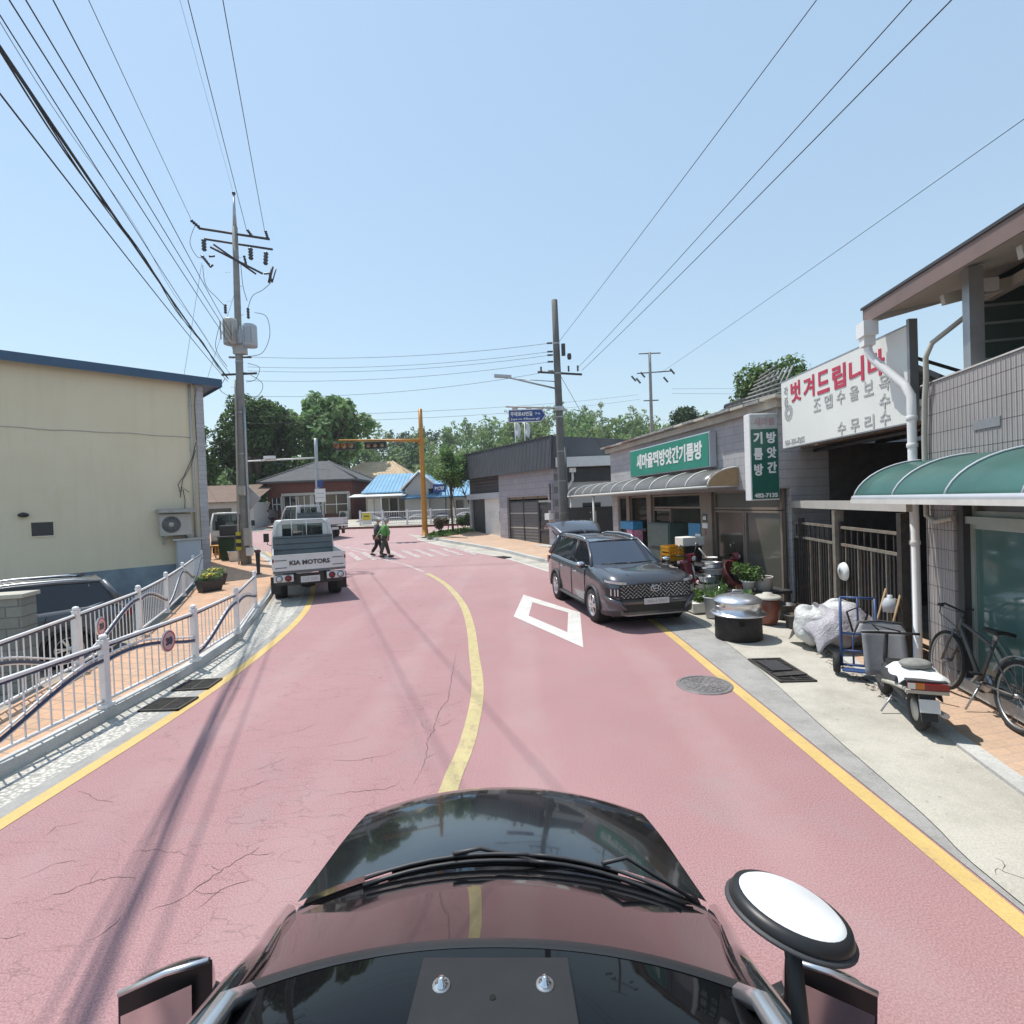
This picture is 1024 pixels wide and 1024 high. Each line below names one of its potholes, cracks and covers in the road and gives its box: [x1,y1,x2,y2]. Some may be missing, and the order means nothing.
manhole cover [676,675,734,695]
crack [407,654,459,781]
drain grate [171,678,223,692]
drain grate [748,657,817,683]
drain grate [137,696,199,712]
crack [159,848,273,908]
